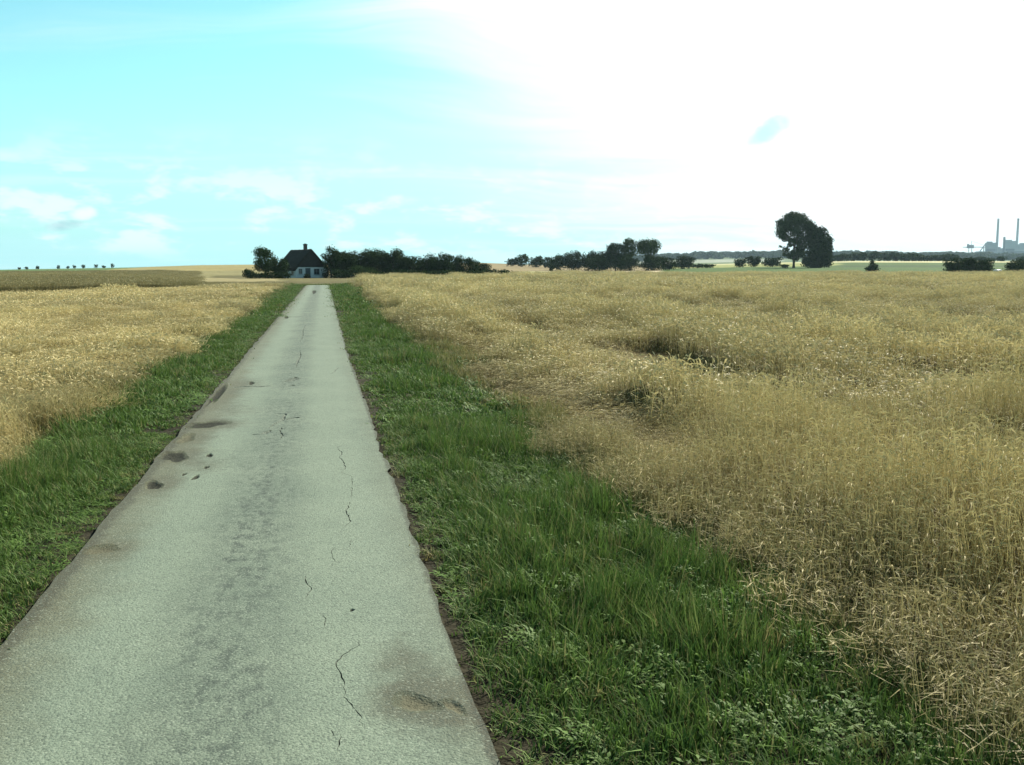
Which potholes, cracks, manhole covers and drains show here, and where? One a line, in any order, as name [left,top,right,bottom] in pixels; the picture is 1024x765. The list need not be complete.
crack [331,447,353,563]
pothole [391,690,445,713]
crack [282,327,305,386]
pothole [158,450,189,463]
pothole [184,420,233,429]
crack [331,642,363,752]
crack [253,414,299,439]
pothole [144,480,164,490]
pothole [204,382,228,408]
